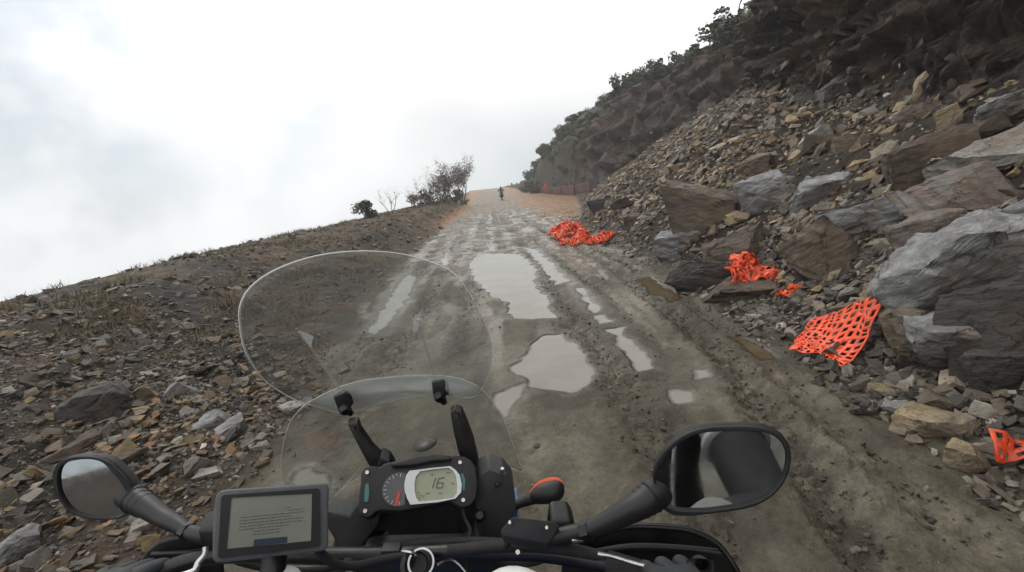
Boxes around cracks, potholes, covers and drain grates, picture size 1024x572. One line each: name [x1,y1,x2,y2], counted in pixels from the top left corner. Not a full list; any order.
pothole [505,333,599,394]
pothole [633,276,683,303]
pothole [489,381,527,419]
pothole [601,325,659,372]
pothole [467,252,559,319]
pothole [522,247,574,285]
pothole [726,334,783,361]
pothole [665,386,702,406]
